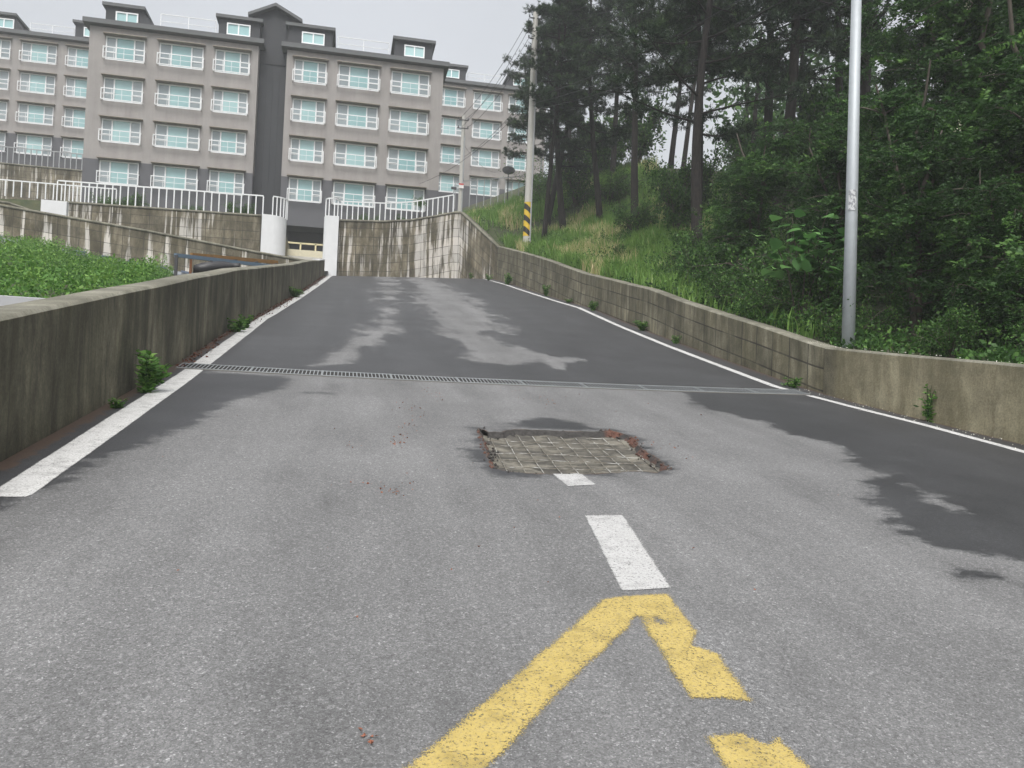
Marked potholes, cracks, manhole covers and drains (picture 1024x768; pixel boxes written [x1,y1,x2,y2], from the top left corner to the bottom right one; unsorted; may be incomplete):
pothole [476,427,672,474]
